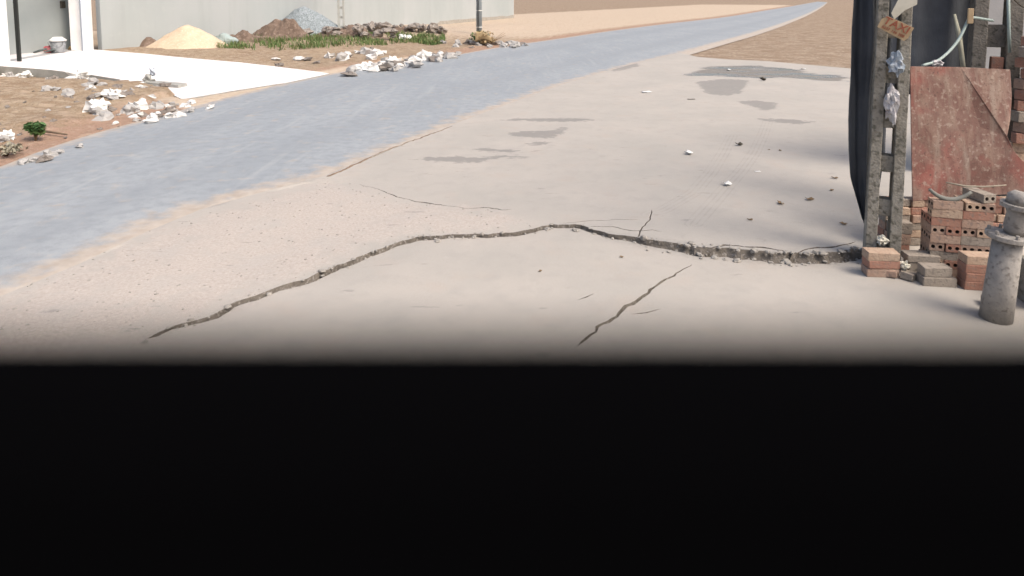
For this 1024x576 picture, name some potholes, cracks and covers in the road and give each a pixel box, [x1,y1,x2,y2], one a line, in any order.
crack [169,126,862,329]
